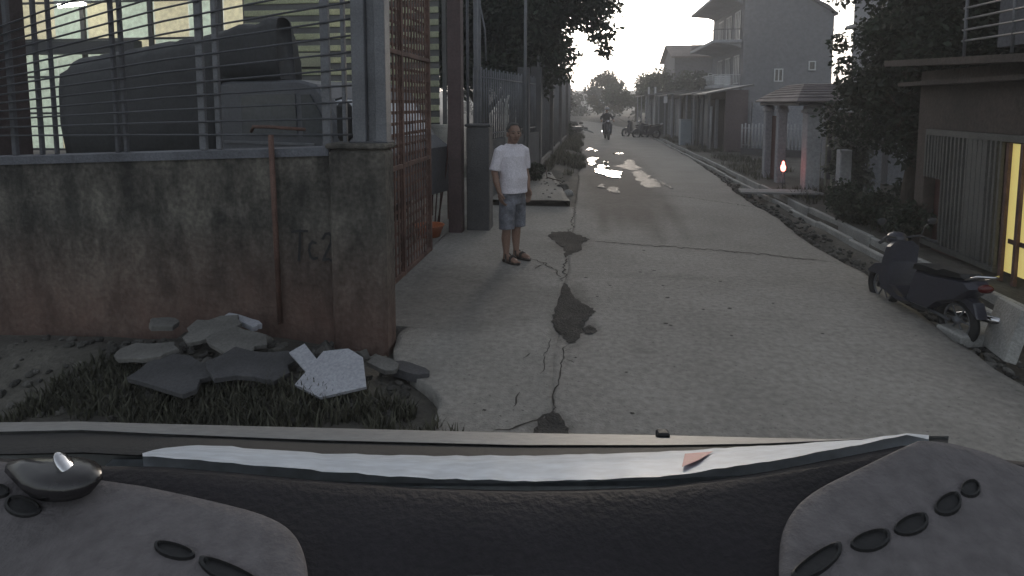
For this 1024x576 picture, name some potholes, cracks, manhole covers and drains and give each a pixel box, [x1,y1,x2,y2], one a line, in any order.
crack [495,339,573,430]
pothole [551,283,596,344]
pothole [548,231,590,257]
pothole [533,411,569,434]
